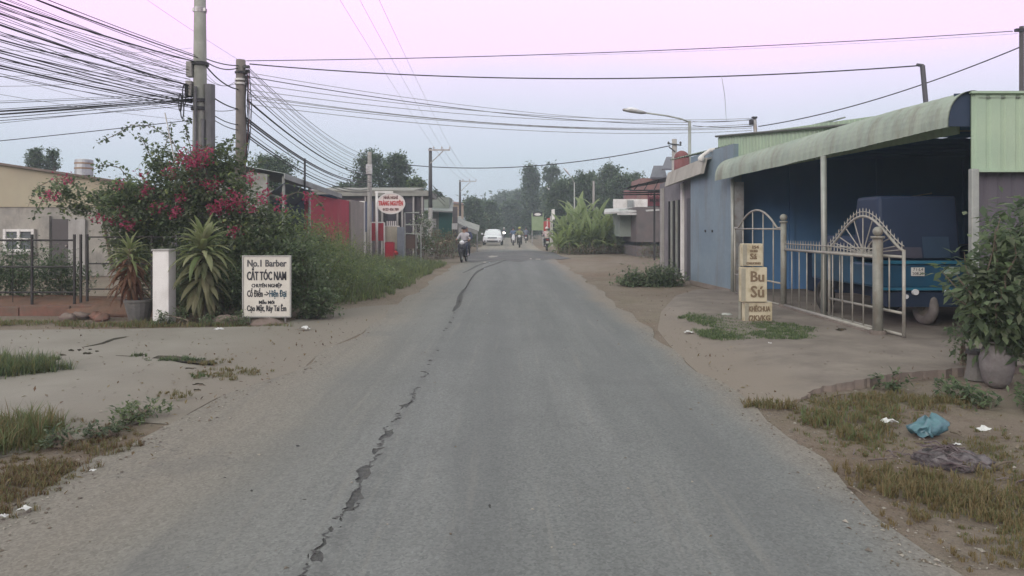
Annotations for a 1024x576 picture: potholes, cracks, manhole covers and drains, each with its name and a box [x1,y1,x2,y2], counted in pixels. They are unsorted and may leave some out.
crack [452,260,506,311]
